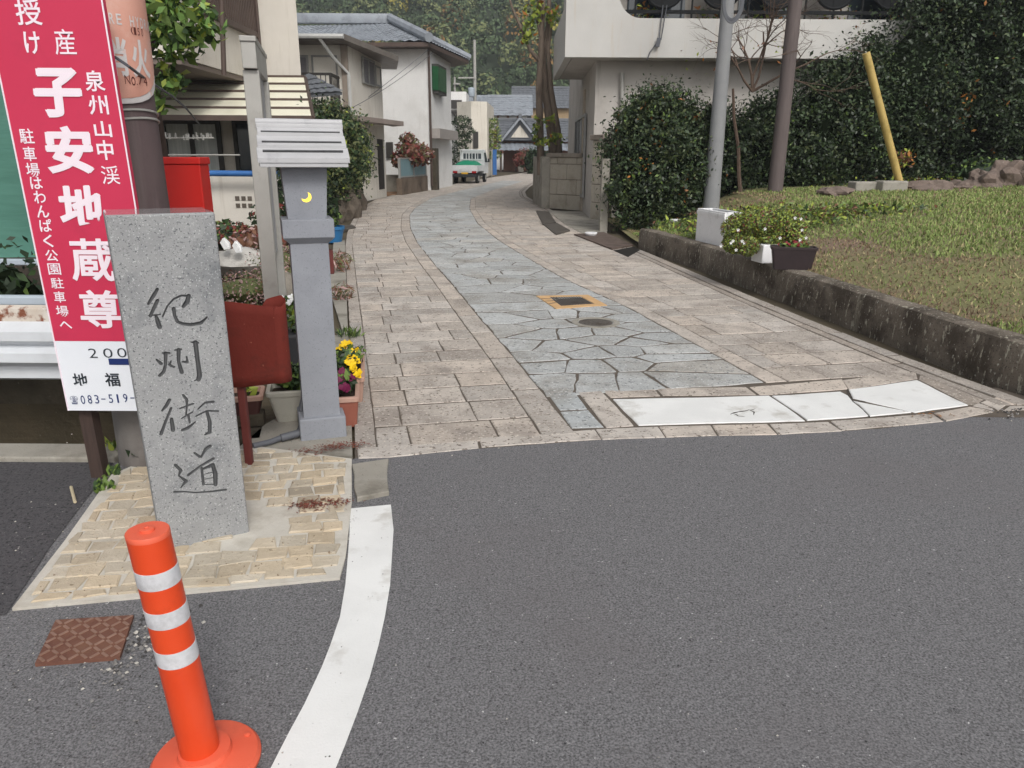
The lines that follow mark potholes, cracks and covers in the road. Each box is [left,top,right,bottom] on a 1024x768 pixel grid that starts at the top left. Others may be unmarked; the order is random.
drain grate [536,295,607,309]
manhole cover [572,317,620,328]
crack [846,389,913,418]
utility cover [35,615,134,667]
